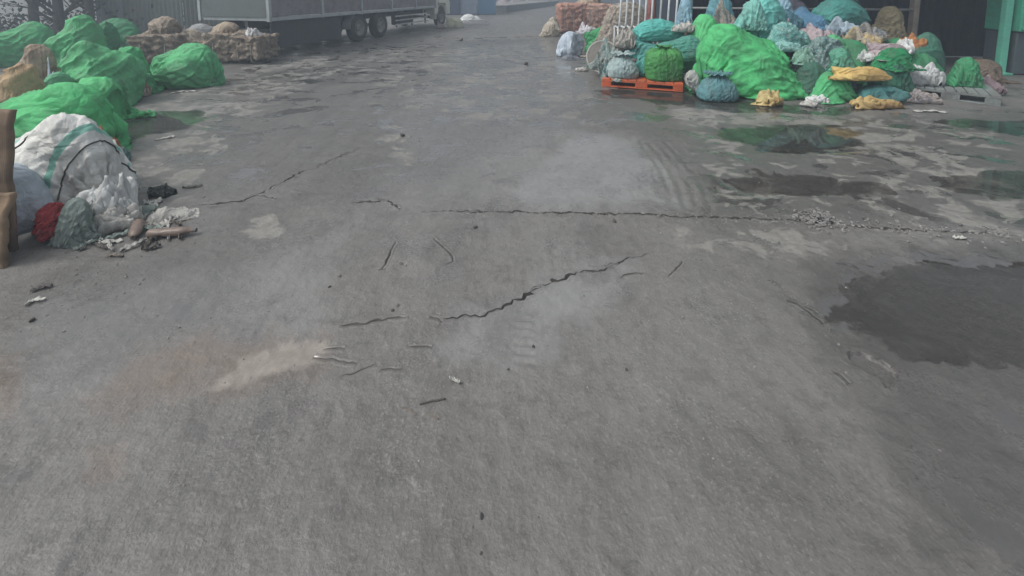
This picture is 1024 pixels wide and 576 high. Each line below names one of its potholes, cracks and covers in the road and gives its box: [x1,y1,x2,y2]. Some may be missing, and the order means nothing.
crack [833,368,853,385]
crack [310,209,1021,382]
crack [191,148,401,210]
